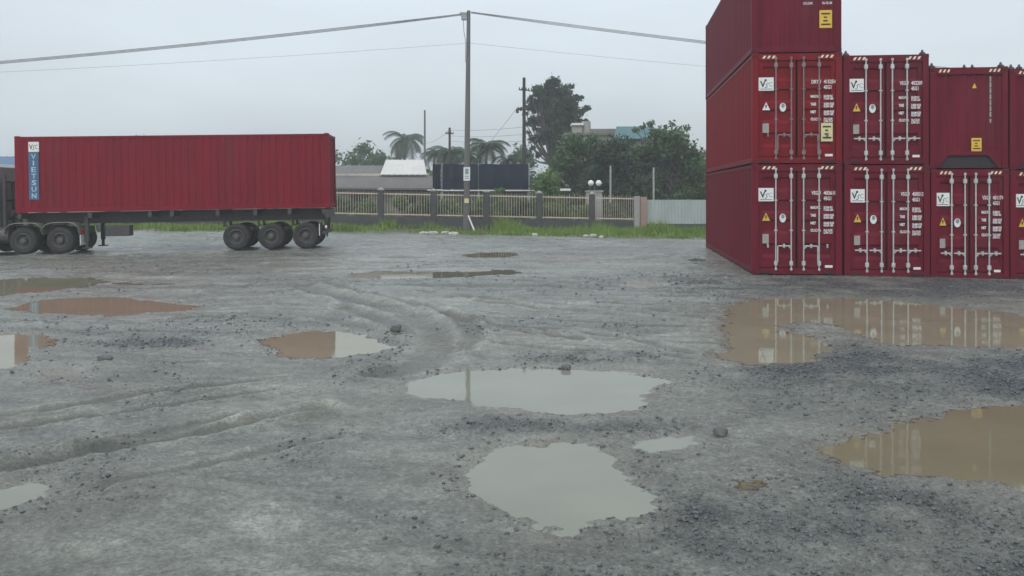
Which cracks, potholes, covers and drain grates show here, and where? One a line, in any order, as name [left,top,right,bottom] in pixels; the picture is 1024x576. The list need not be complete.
pothole [615,427,727,458]
pothole [246,327,413,360]
pothole [383,362,687,419]
pothole [0,471,89,517]
pothole [702,296,1024,366]
pothole [435,434,695,549]
pothole [336,269,530,280]
pothole [0,330,71,372]
pothole [0,276,112,296]
pothole [787,398,1024,497]
pothole [0,294,215,317]
